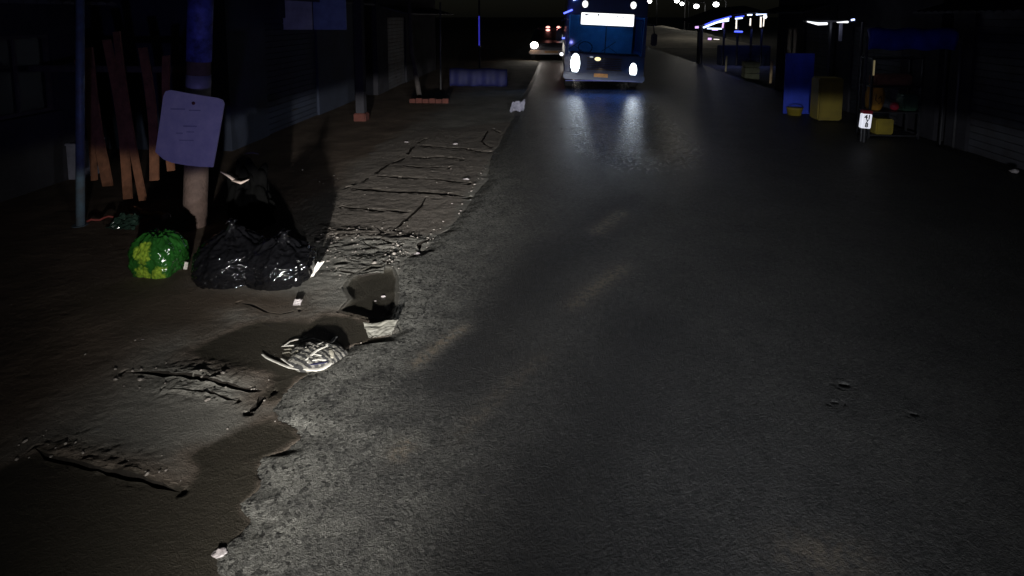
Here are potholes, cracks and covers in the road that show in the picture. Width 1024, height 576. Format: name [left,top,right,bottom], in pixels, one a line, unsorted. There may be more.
crack [120,367,277,415]
crack [24,442,189,501]
crack [330,129,506,277]
pothole [903,408,925,420]
pothole [338,264,399,320]
pothole [825,397,844,407]
pothole [832,379,856,391]
